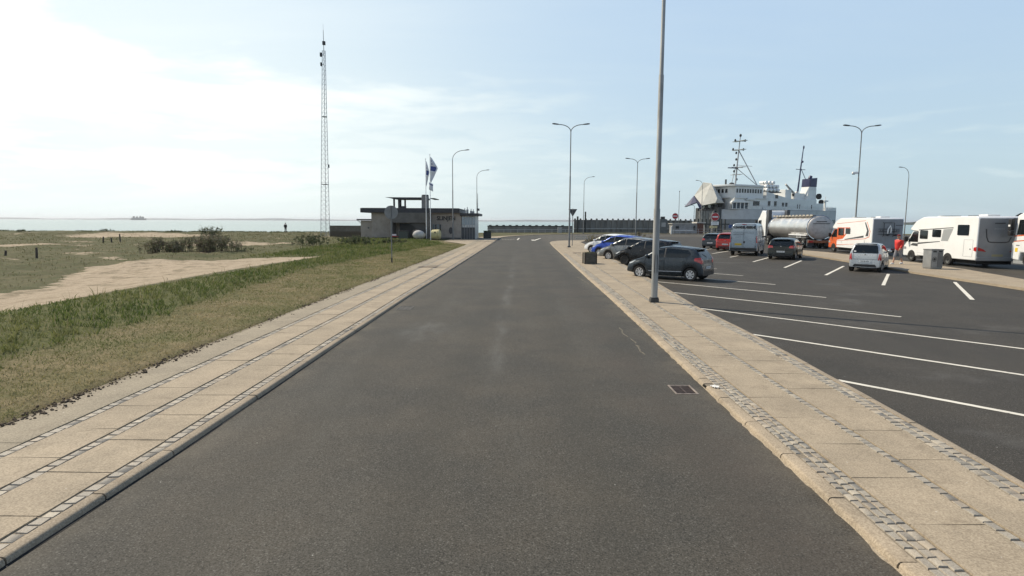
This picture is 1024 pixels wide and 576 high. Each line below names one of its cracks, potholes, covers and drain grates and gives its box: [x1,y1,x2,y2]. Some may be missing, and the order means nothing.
drain grate [668,385,699,394]
